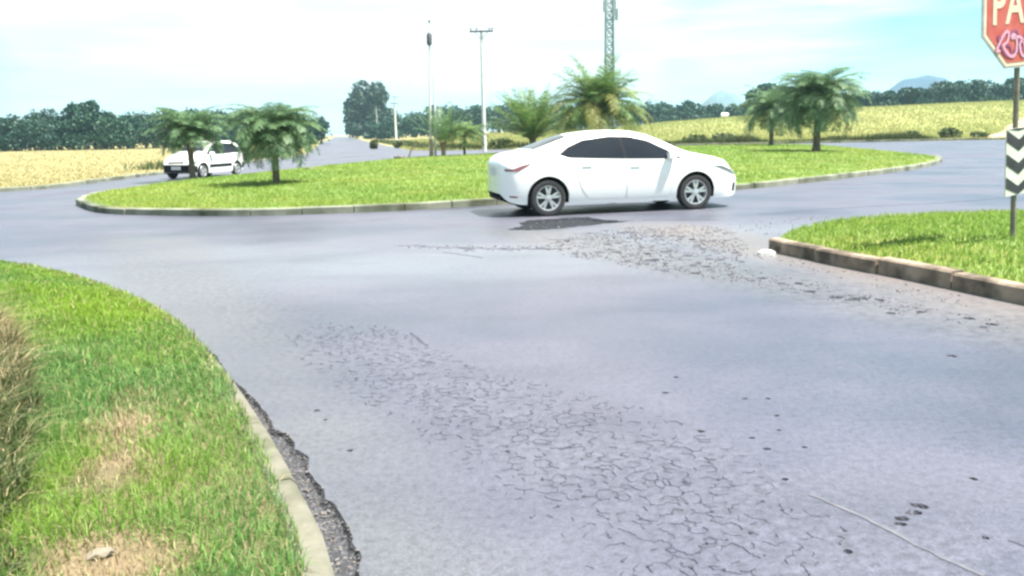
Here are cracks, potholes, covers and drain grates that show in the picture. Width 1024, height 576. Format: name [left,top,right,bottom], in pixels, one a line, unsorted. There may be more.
crack [398,226,988,327]
crack [284,322,847,576]
pothole [508,217,635,230]
crack [808,493,987,576]
